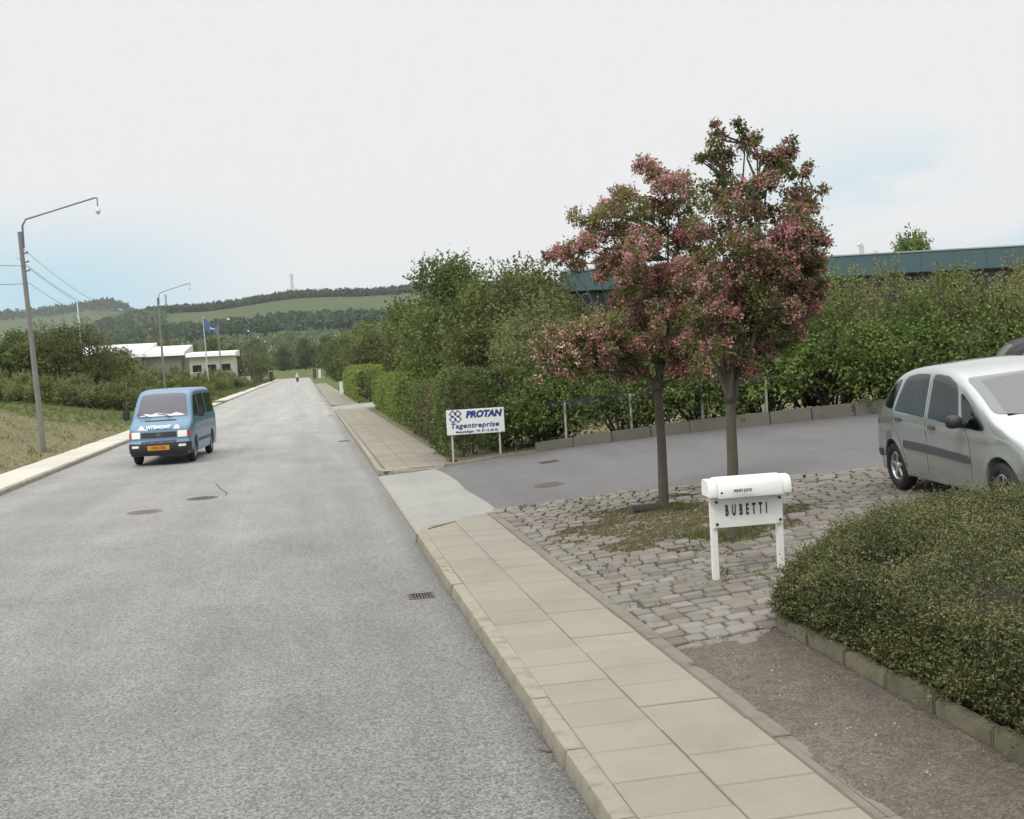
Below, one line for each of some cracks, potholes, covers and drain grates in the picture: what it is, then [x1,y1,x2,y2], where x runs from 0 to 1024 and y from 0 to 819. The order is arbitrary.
drain grate [407,592,436,600]
manhole cover [530,481,567,489]
